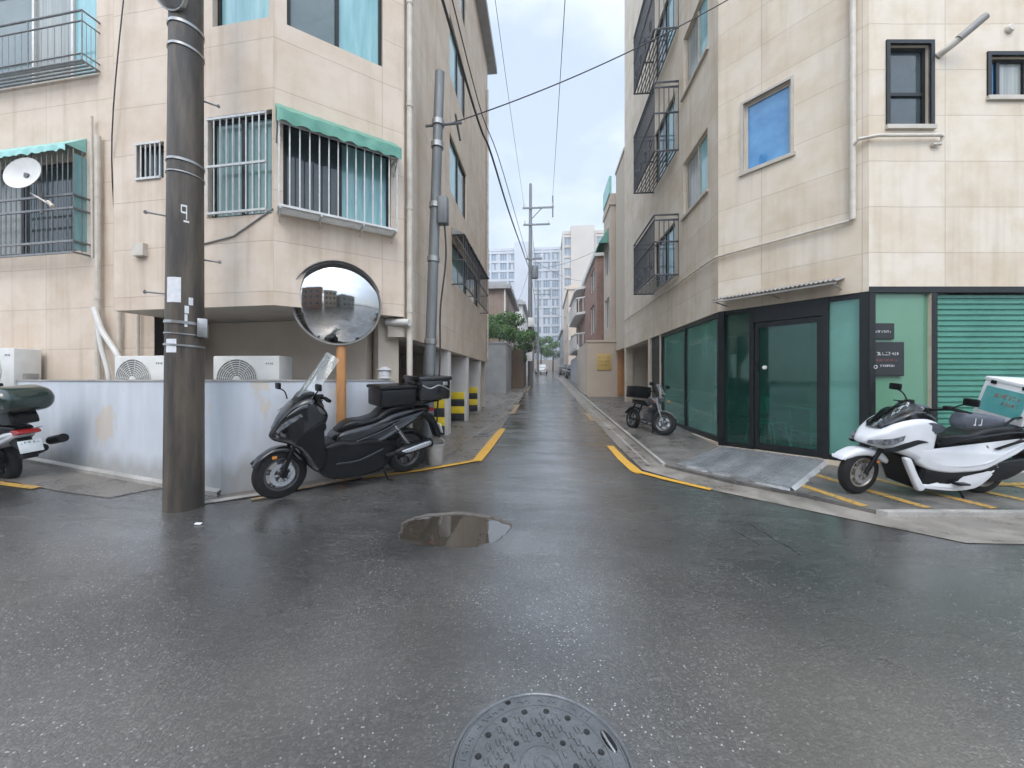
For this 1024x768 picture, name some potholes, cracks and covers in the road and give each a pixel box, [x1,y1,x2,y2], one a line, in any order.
pothole [397,512,512,548]
crack [733,524,800,555]
manhole cover [448,691,635,768]
